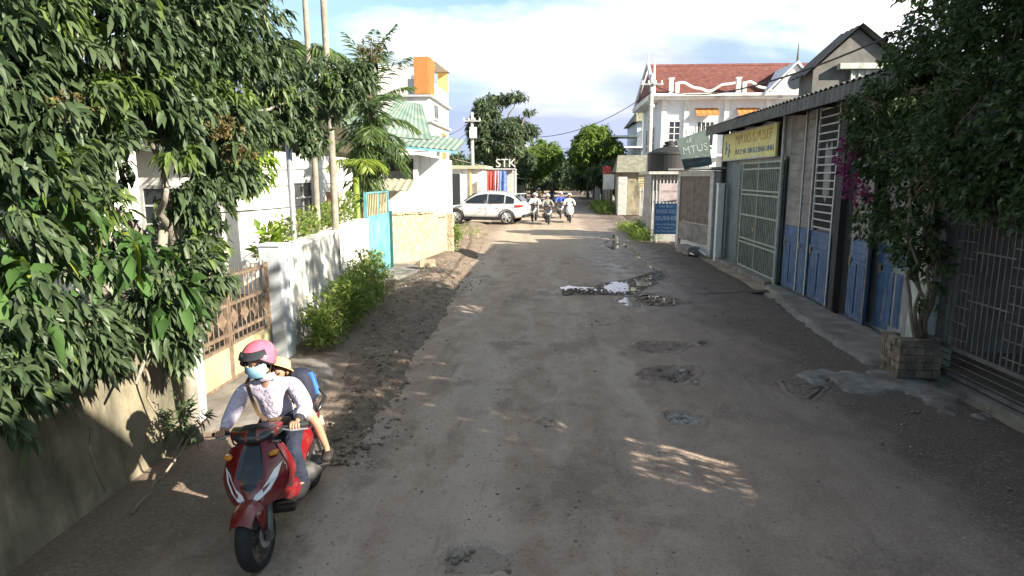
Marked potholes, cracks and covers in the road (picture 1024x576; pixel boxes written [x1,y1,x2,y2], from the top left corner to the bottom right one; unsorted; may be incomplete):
pothole [623,340,695,356]
pothole [628,364,706,387]
pothole [656,408,713,429]
pothole [692,339,715,347]
pothole [425,536,538,576]
pothole [557,270,670,297]
pothole [526,415,568,433]
pothole [613,293,699,308]
pothole [602,234,627,250]
